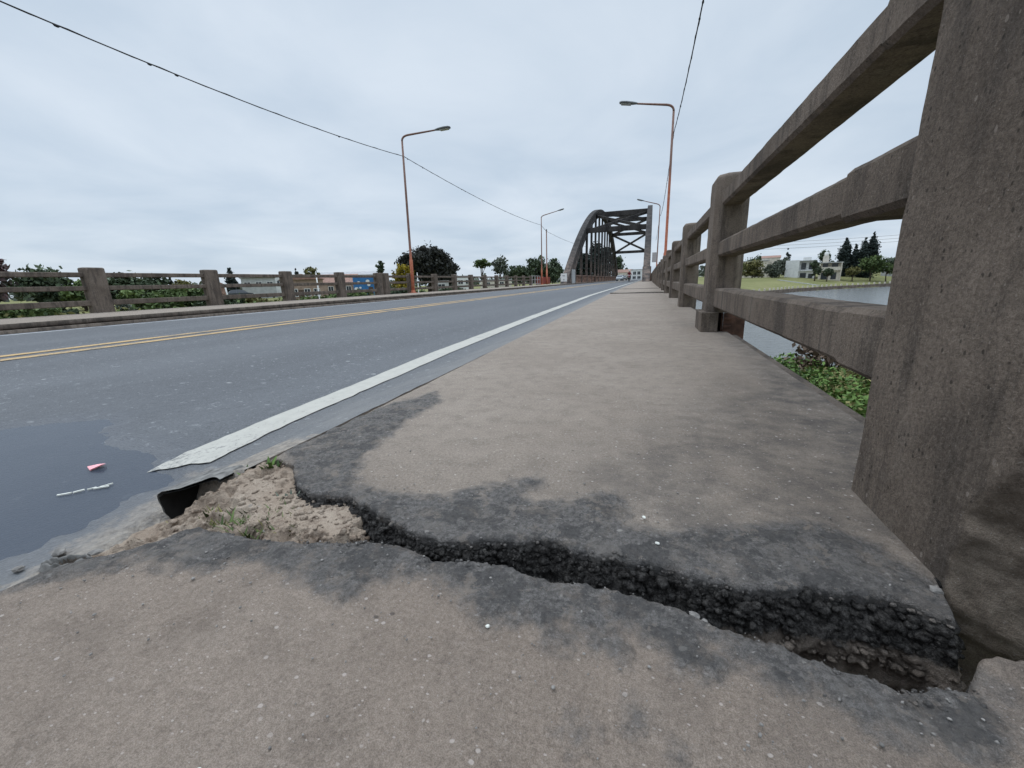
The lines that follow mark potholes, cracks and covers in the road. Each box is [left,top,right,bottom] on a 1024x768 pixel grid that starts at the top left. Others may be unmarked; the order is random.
crack [231,481,992,731]
pothole [92,462,371,558]
